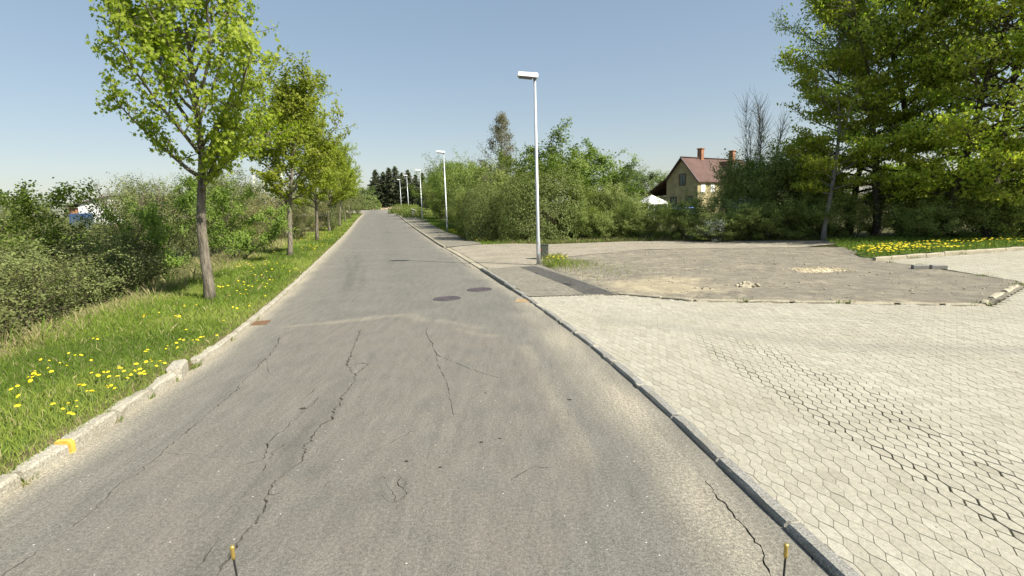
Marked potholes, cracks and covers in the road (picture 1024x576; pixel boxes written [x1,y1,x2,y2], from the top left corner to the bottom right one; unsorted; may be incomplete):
crack [368,328,498,455]
crack [705,481,771,576]
crack [192,330,372,575]
crack [2,338,280,576]
crack [379,476,407,503]
